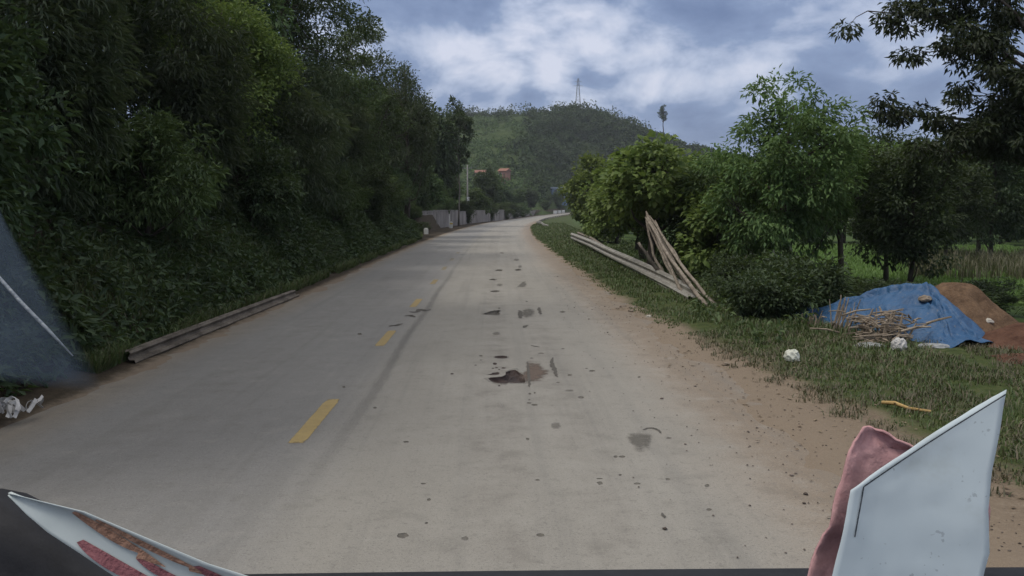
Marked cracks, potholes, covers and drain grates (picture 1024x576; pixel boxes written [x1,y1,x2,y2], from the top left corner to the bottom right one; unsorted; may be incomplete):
pothole [485,368,527,385]
